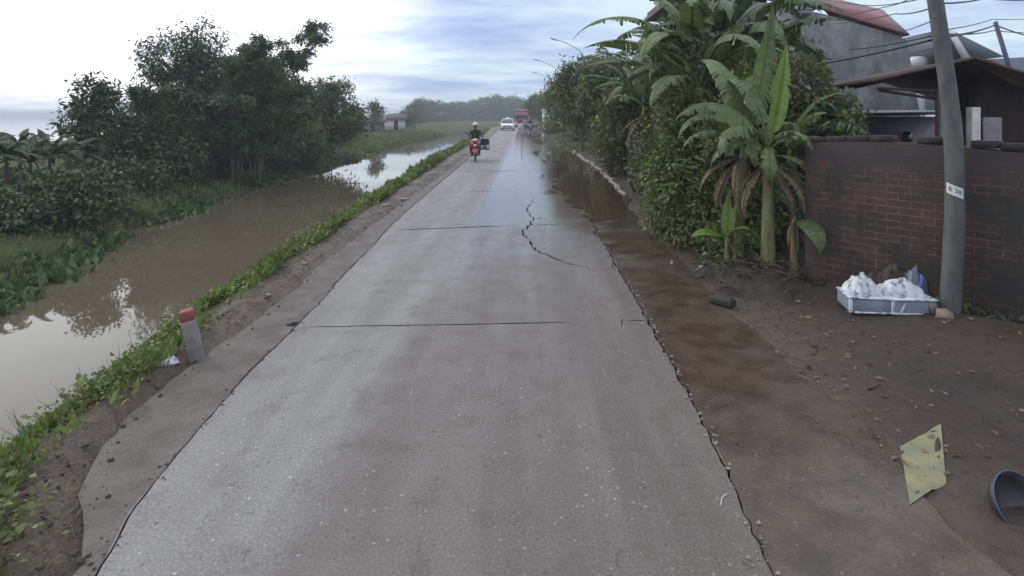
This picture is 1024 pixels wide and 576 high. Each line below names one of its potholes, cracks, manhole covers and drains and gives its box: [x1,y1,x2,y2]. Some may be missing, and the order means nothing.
crack [585,211,774,576]
crack [522,201,600,275]
